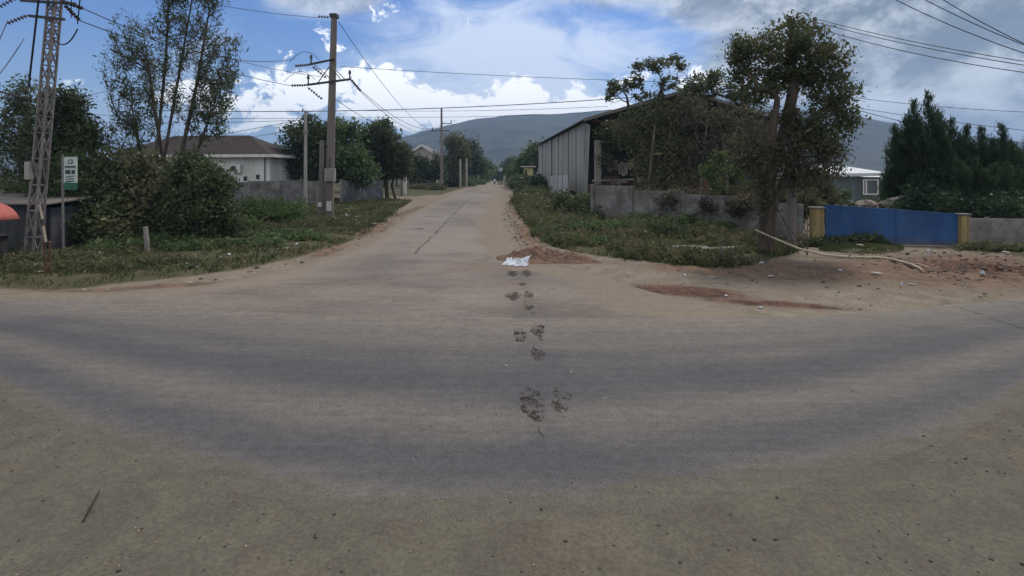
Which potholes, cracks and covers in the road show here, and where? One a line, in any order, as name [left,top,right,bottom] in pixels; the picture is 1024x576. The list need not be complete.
crack [958,307,1024,329]
